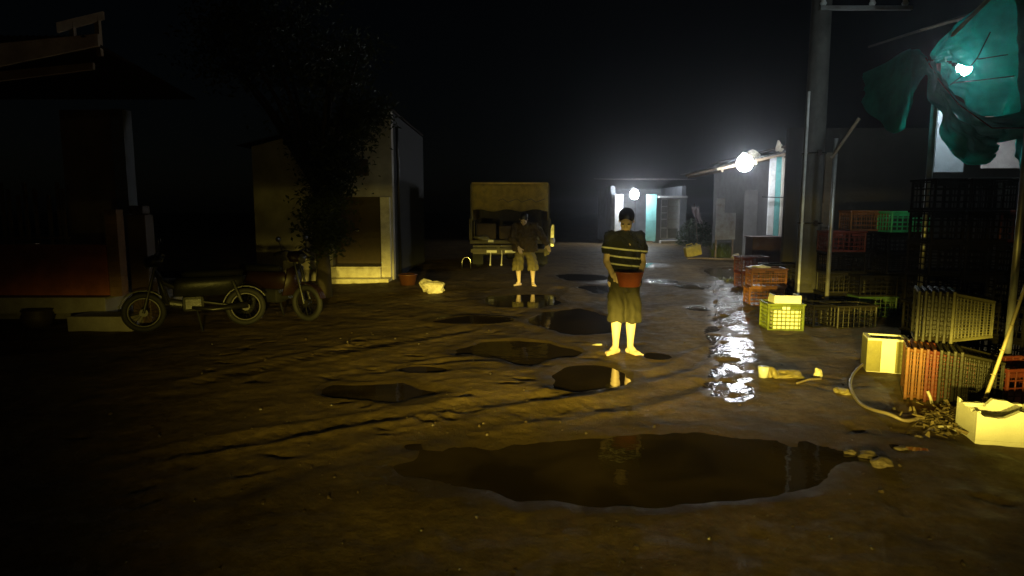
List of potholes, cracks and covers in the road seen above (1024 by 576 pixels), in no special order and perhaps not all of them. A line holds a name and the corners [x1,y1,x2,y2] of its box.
pothole [551,273,609,281]
pothole [469,292,569,309]
pothole [536,358,644,393]
pothole [440,337,589,367]
pothole [348,423,984,515]
pothole [516,304,627,337]
pothole [312,378,443,404]
pothole [423,315,518,324]
